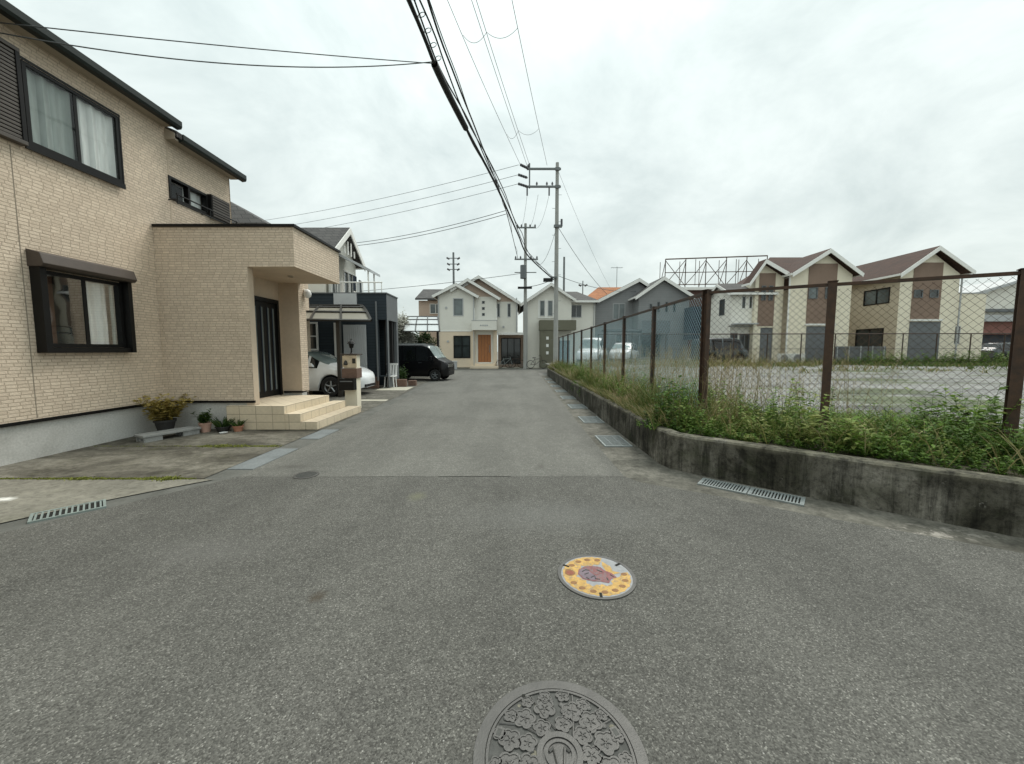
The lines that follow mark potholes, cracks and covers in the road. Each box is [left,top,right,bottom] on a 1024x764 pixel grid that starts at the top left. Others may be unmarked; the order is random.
drain grate [27,499,106,524]
drain grate [697,478,750,495]
manhole cover [558,555,636,600]
drain grate [595,435,633,447]
drain grate [747,487,806,507]
manhole cover [293,471,319,479]
manhole cover [473,680,649,764]
